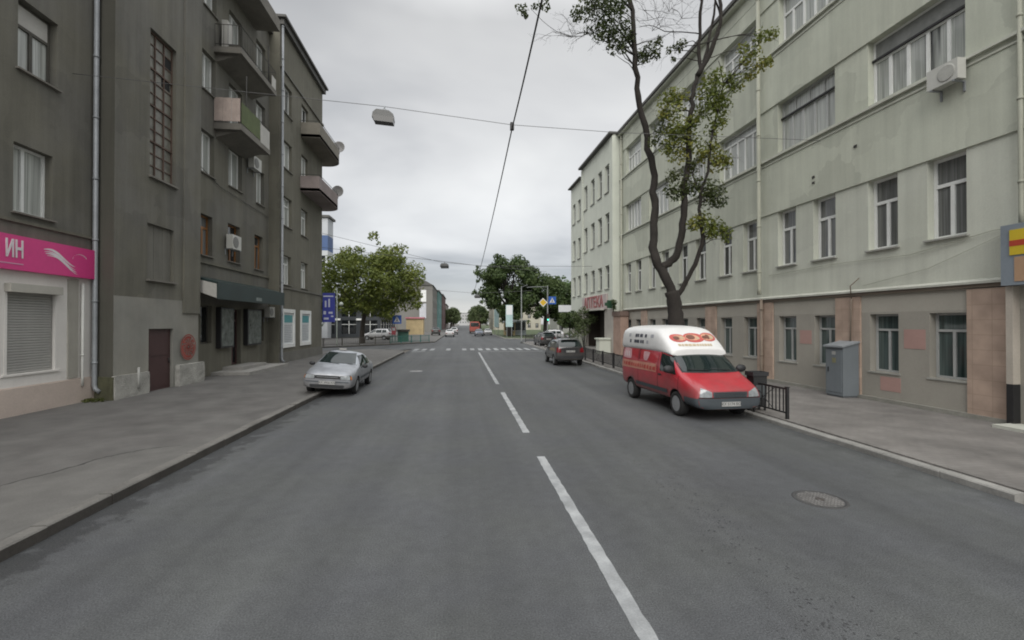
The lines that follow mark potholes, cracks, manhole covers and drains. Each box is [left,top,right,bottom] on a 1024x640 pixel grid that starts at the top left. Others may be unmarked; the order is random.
manhole cover [791,490,850,509]
